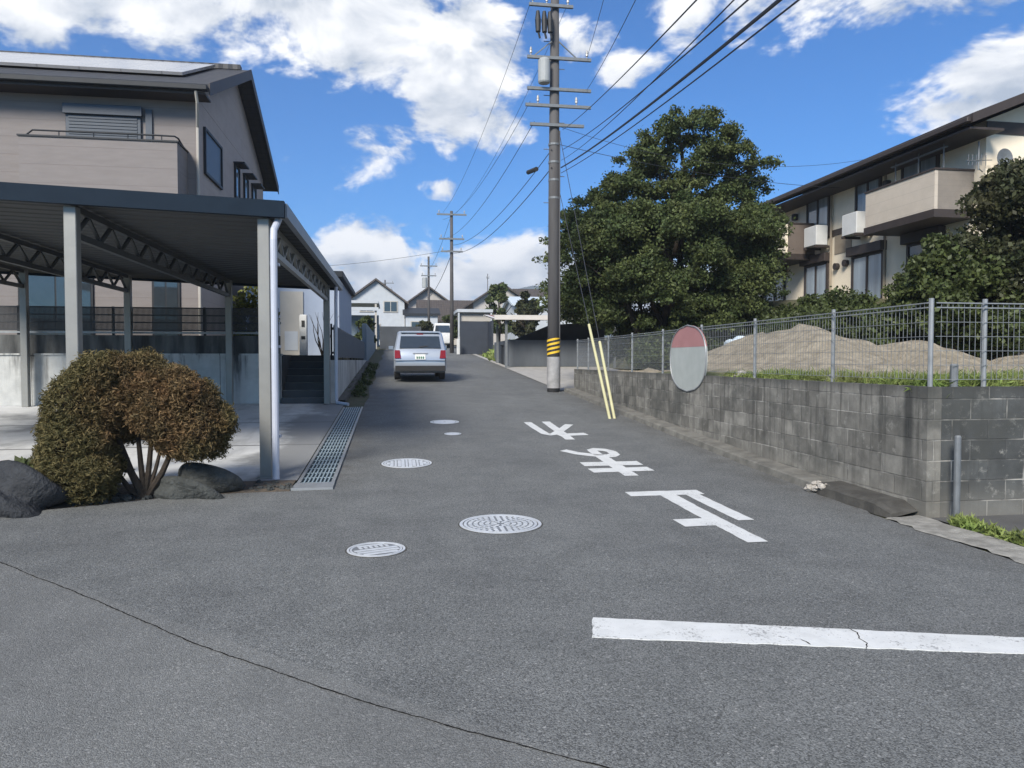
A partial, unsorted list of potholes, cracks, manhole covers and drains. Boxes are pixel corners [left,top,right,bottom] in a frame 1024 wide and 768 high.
manhole cover [380,458,433,468]
manhole cover [345,542,407,558]
manhole cover [458,514,543,534]
drain grate [291,407,363,491]
